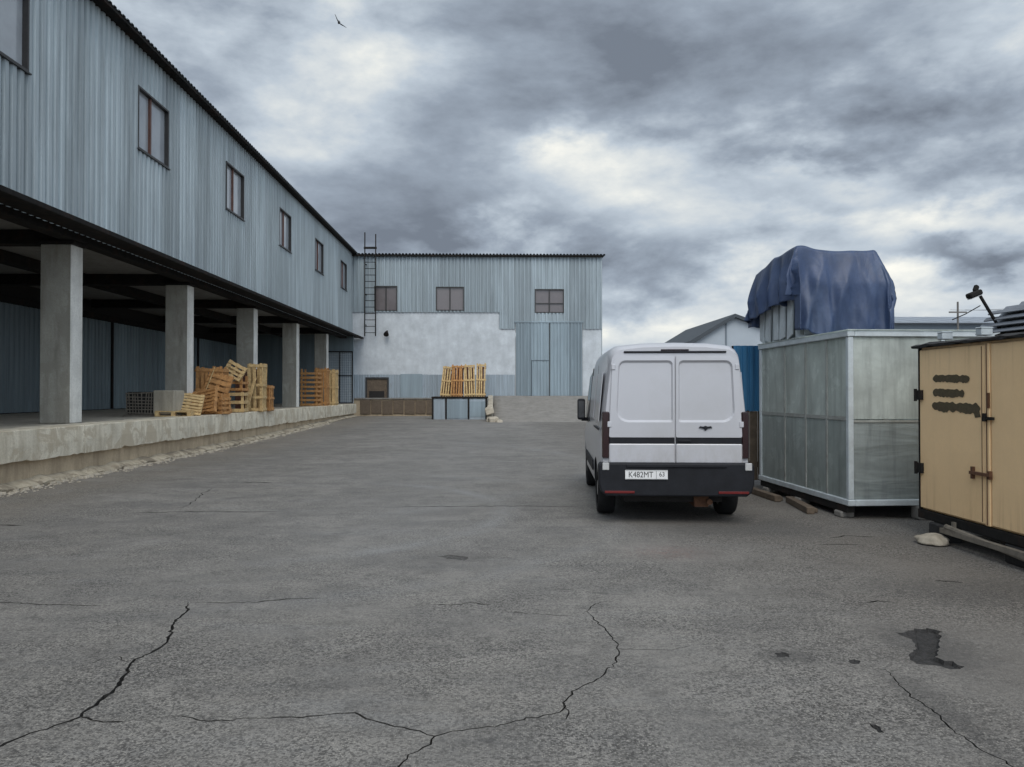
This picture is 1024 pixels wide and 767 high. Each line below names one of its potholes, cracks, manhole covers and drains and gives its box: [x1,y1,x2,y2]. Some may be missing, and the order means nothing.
pothole [898,628,964,669]
crack [0,602,688,767]
crack [886,670,1013,767]
